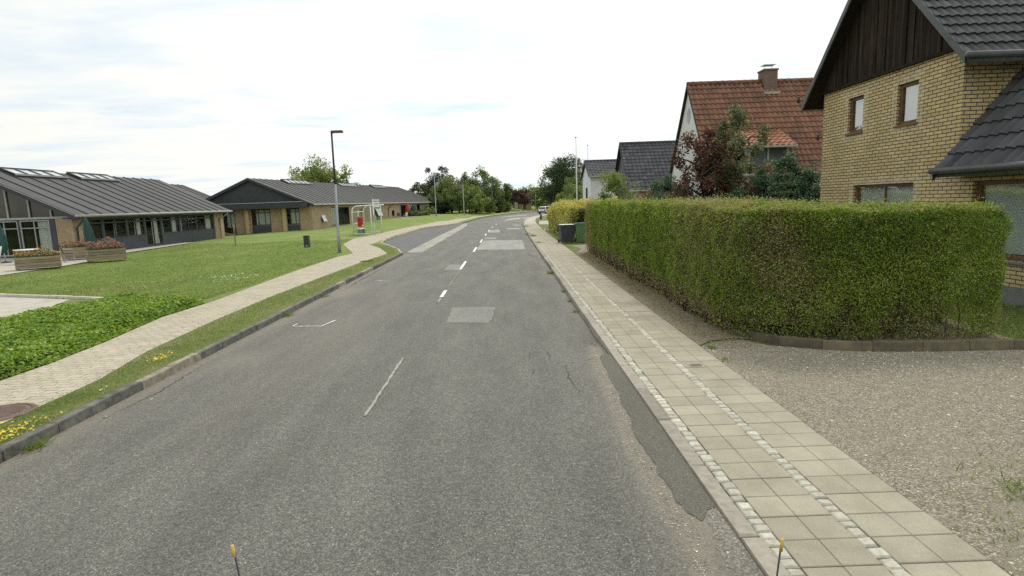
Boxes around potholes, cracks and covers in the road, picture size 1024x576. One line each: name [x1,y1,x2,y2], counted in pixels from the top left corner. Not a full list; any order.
manhole cover [0,403,38,421]
